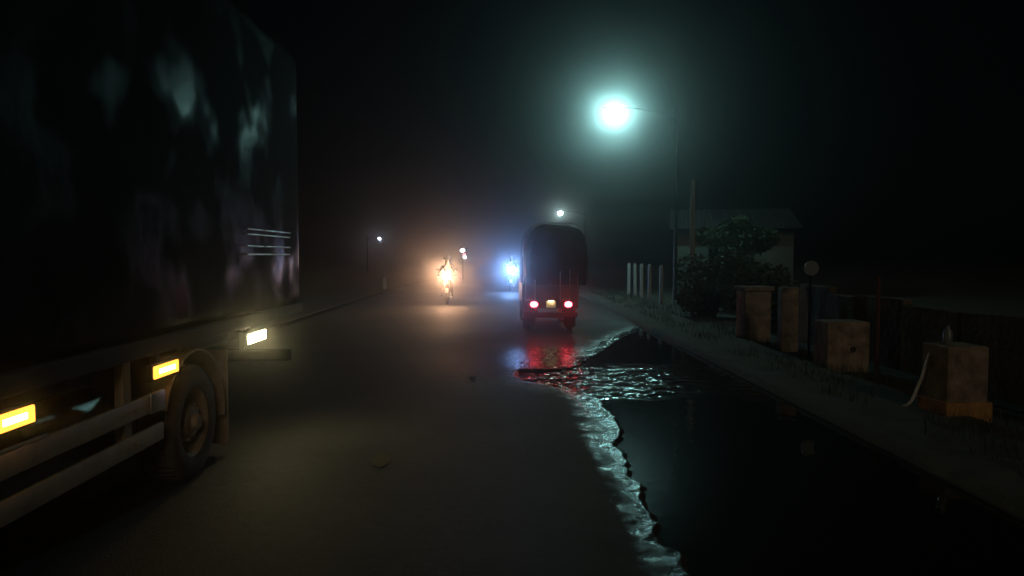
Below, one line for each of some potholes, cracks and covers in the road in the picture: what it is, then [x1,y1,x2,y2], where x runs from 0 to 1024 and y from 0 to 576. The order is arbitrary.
pothole [513,331,691,576]
